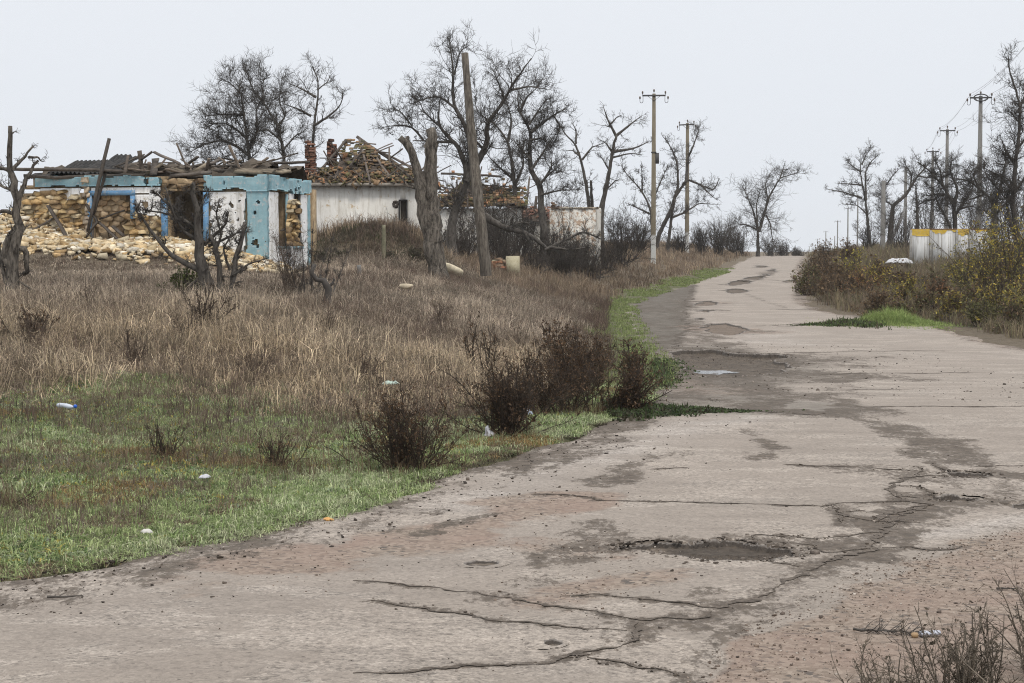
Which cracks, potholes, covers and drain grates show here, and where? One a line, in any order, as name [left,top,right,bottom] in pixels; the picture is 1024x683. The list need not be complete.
pothole [661,348,804,378]
pothole [453,558,513,568]
pothole [689,323,761,336]
pothole [608,537,803,562]
crack [353,462,1007,676]
pothole [523,636,571,650]
